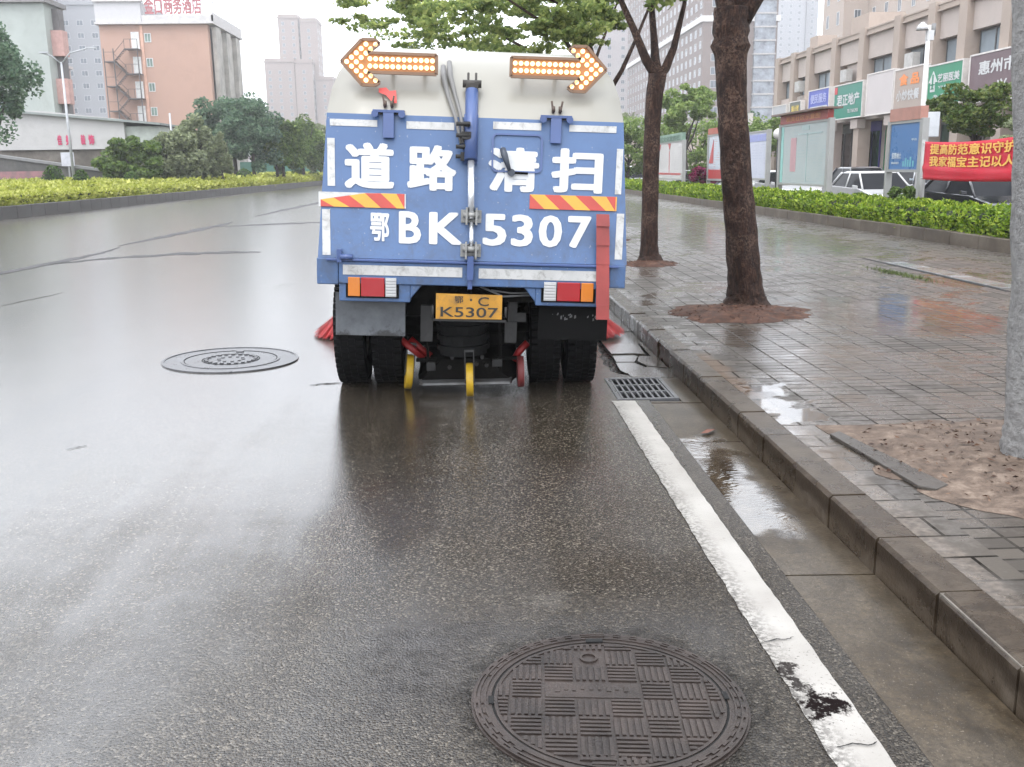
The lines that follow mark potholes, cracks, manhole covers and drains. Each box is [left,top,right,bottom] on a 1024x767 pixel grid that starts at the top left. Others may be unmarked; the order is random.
crack [0,202,320,274]
drain grate [604,377,679,401]
manhole cover [471,634,751,767]
manhole cover [161,347,299,374]
